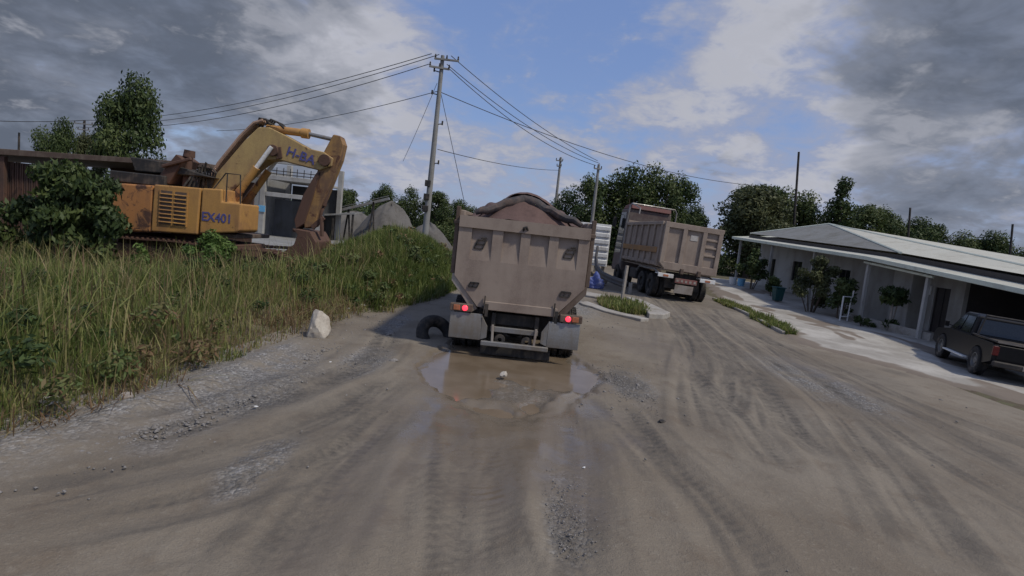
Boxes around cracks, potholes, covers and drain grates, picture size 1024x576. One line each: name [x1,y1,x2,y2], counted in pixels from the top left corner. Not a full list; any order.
pothole [410,334,612,440]
